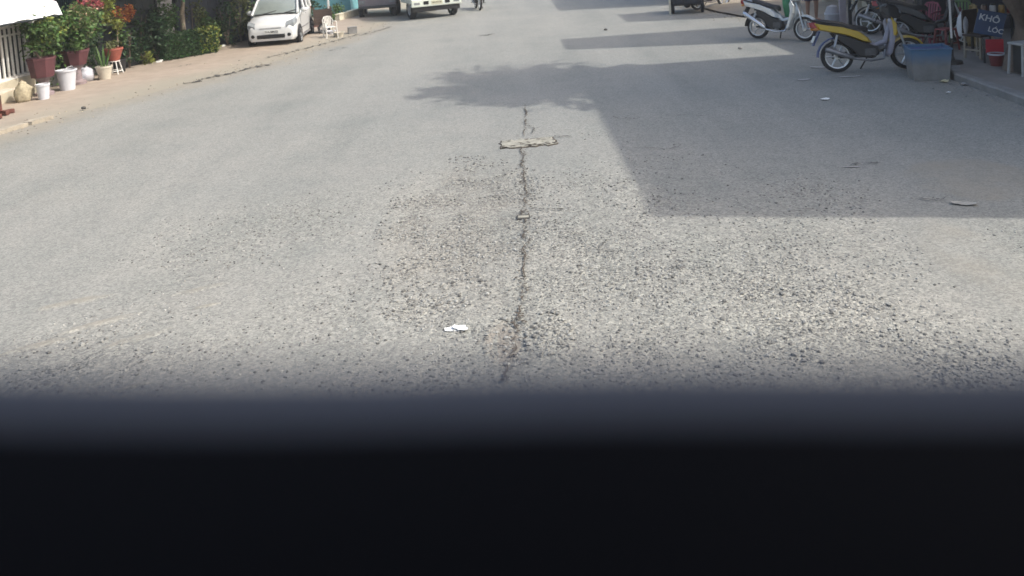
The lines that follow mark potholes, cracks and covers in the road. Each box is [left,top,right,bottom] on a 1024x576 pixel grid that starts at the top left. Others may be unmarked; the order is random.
crack [502,107,567,362]
